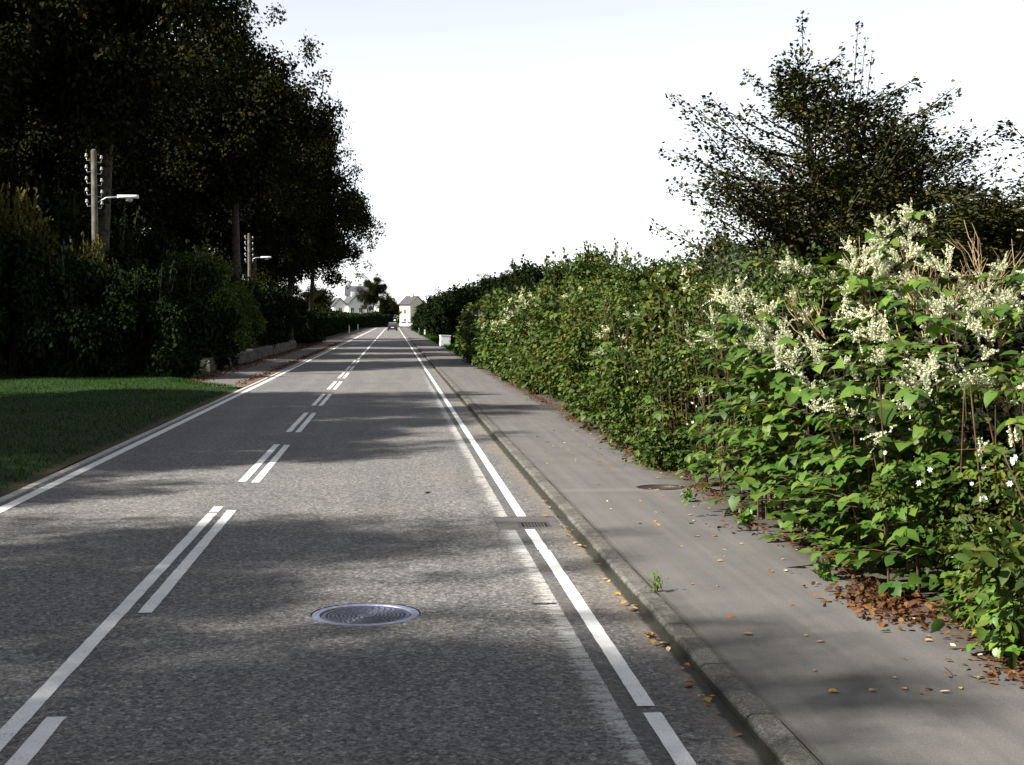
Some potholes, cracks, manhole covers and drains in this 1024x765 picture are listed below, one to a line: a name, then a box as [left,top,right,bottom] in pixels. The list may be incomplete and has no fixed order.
drain grate [493,517,563,530]
manhole cover [311,603,420,626]
